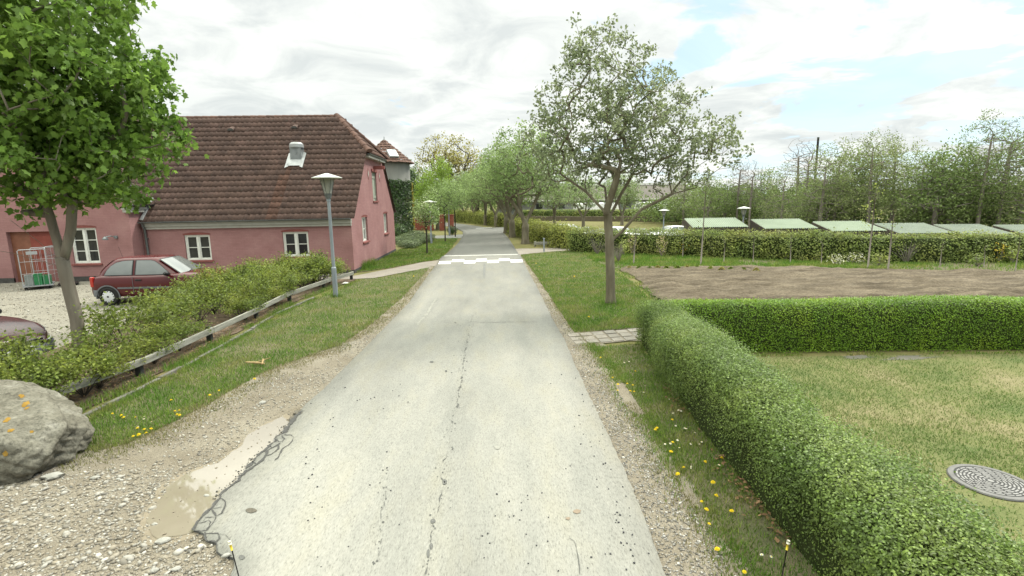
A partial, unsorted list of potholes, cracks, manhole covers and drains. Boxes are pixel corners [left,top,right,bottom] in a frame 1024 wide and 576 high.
manhole cover [946,464,1024,502]
crack [192,410,304,553]
crack [417,299,475,576]
